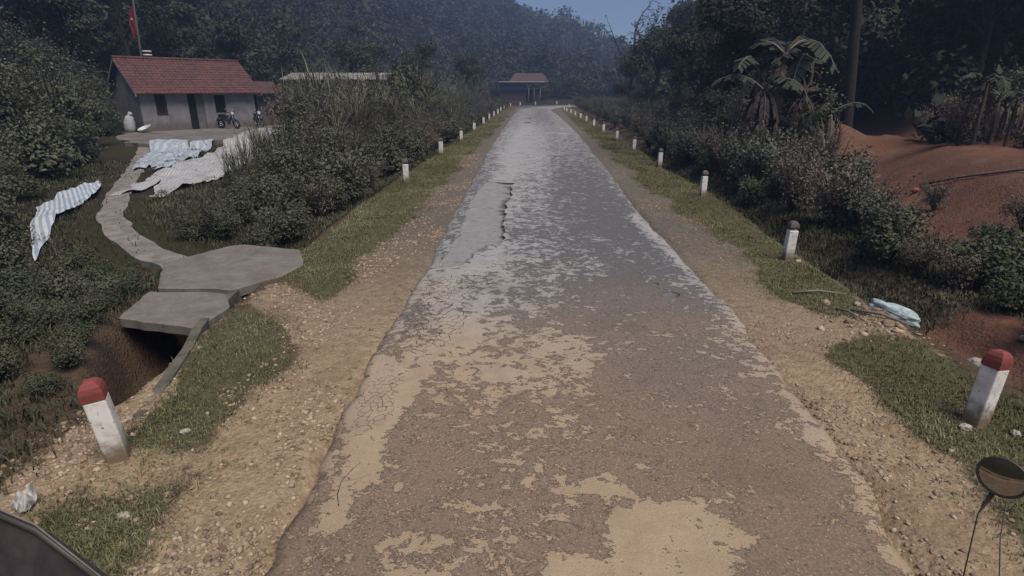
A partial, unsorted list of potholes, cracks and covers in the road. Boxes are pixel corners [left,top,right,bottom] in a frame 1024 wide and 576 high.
crack [398,275,476,354]
crack [353,376,405,430]
